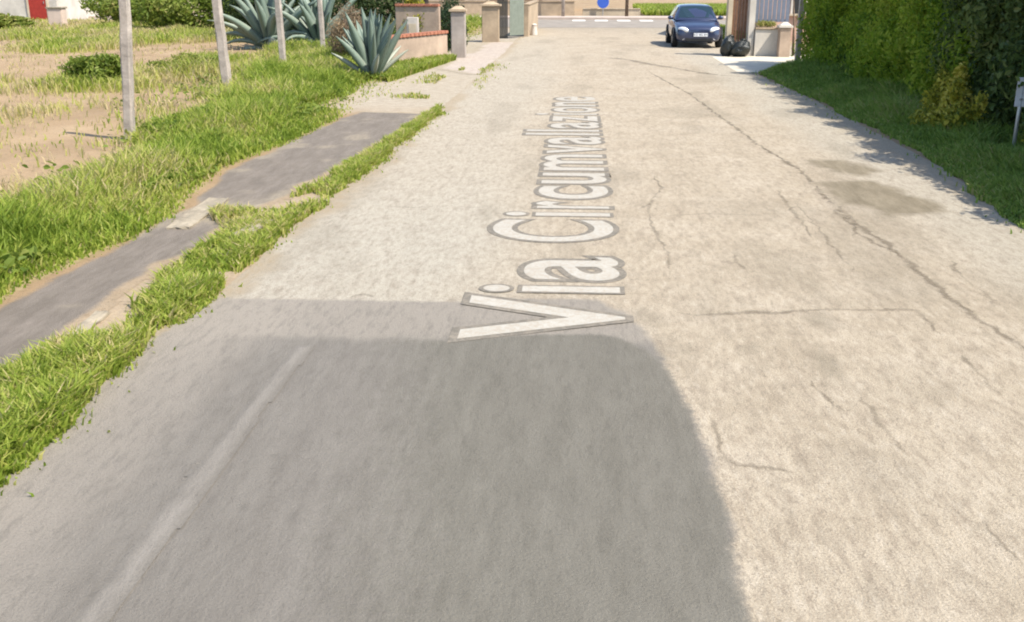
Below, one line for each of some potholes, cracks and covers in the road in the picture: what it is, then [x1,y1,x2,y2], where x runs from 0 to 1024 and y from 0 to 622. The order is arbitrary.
crack [664,80,970,310]
